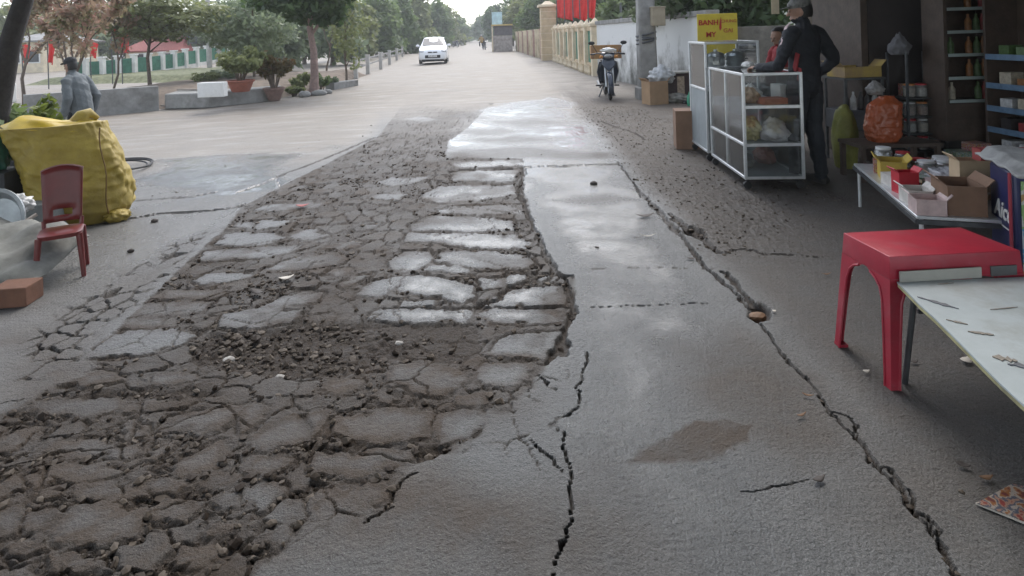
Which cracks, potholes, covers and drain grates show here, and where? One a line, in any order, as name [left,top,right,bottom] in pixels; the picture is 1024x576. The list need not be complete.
crack [0,105,958,576]
pothole [748,302,772,324]
